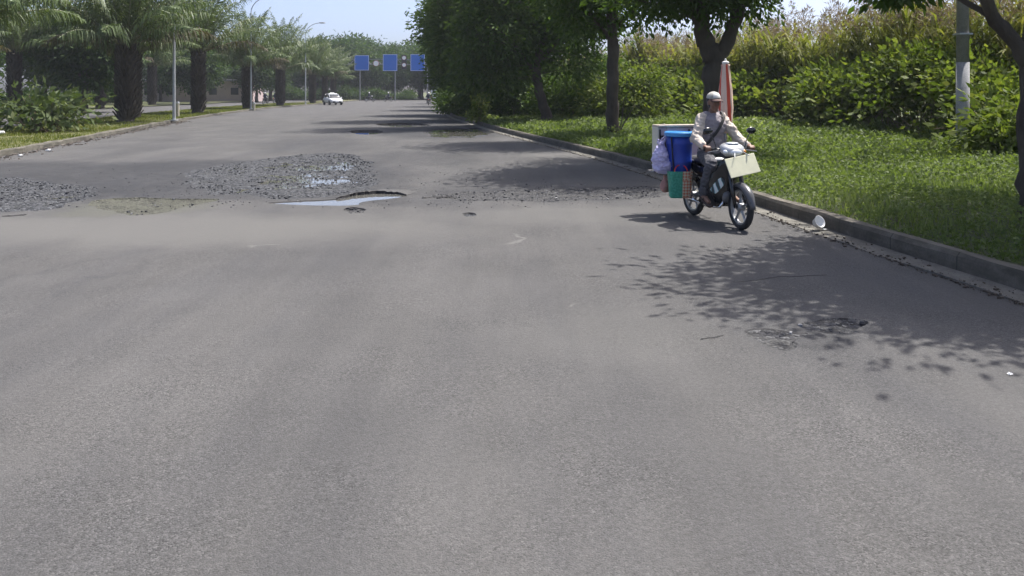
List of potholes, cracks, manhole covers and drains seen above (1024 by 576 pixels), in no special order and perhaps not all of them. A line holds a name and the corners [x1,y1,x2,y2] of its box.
pothole [798,318,869,334]
pothole [431,186,662,203]
pothole [271,189,417,206]
pothole [181,153,381,199]
pothole [744,328,808,351]
pothole [0,177,98,212]
